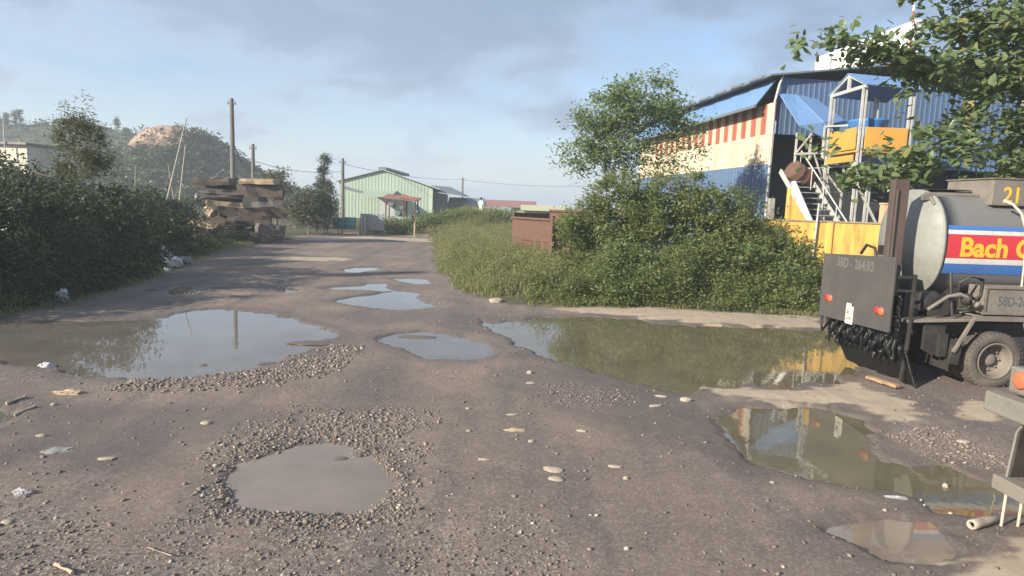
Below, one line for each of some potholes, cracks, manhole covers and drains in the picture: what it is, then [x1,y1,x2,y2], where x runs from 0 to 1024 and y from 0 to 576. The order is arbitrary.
pothole [0,305,364,384]
pothole [309,280,408,292]
pothole [318,288,454,311]
pothole [183,427,441,533]
pothole [360,326,514,364]
pothole [378,276,442,285]
pothole [332,265,395,273]
pothole [456,311,876,400]
pothole [778,495,1018,576]
pothole [682,396,1024,531]
